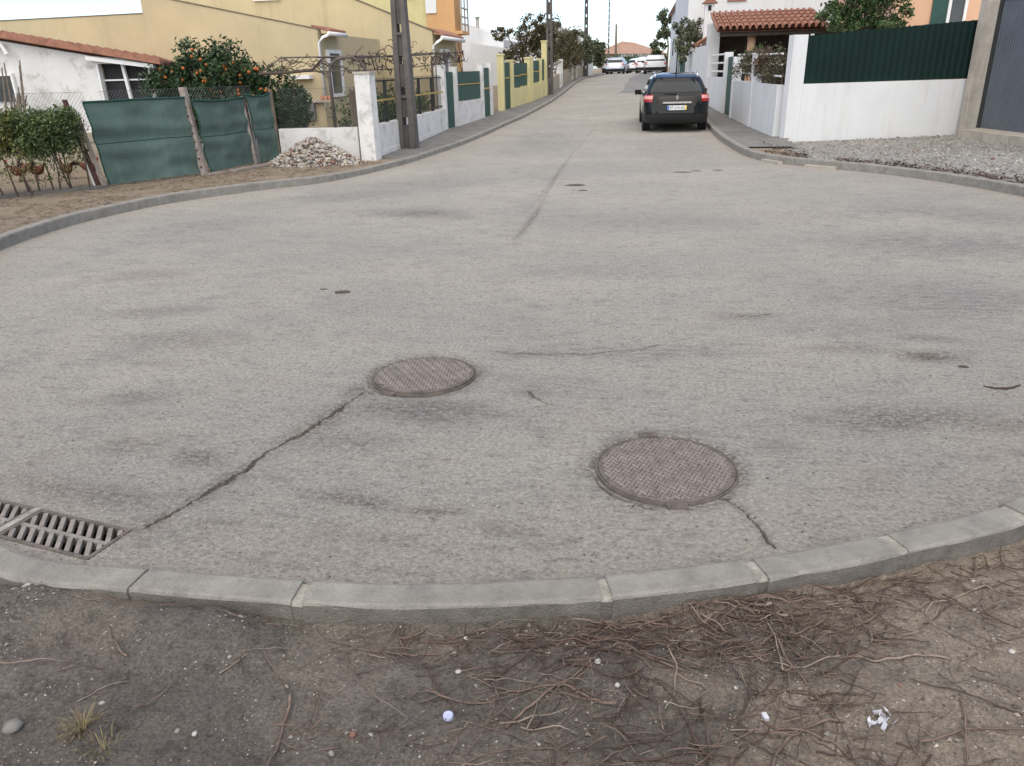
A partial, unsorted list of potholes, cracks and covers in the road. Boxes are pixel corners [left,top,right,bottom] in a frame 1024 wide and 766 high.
crack [145,393,362,528]
manhole cover [372,357,477,398]
crack [719,498,776,549]
drain grate [0,499,35,527]
drain grate [0,509,132,560]
manhole cover [595,432,739,510]
crack [498,339,687,356]
